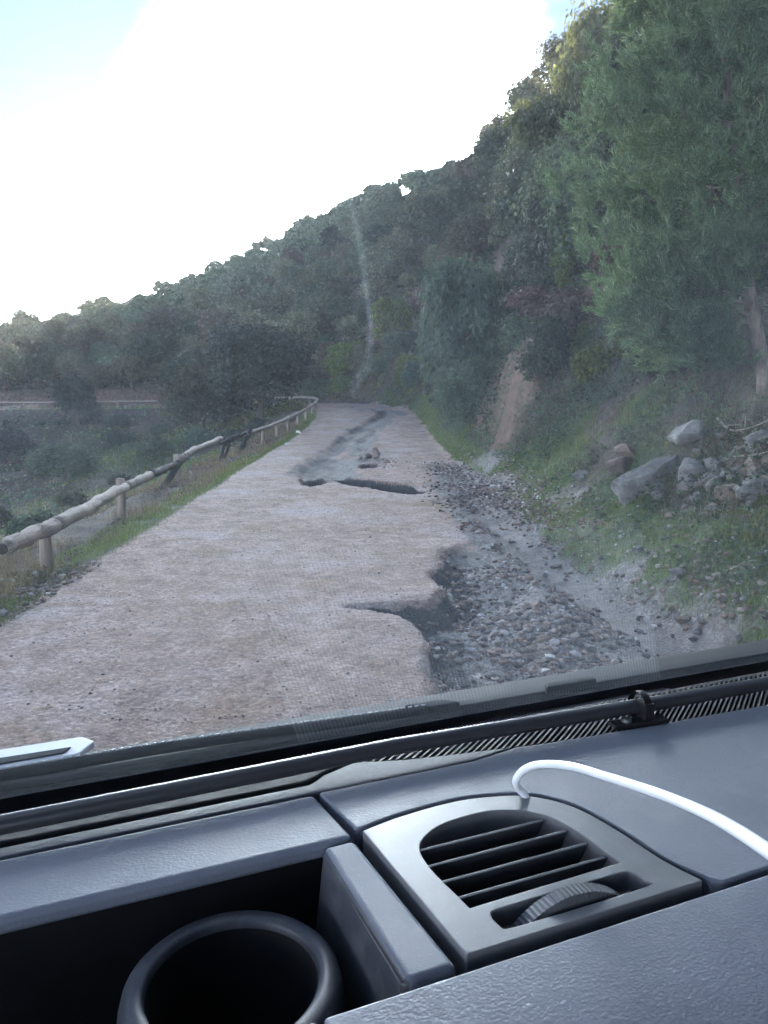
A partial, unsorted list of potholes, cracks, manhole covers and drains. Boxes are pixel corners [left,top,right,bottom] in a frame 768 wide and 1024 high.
pothole [337,547,544,696]
pothole [299,478,328,487]
